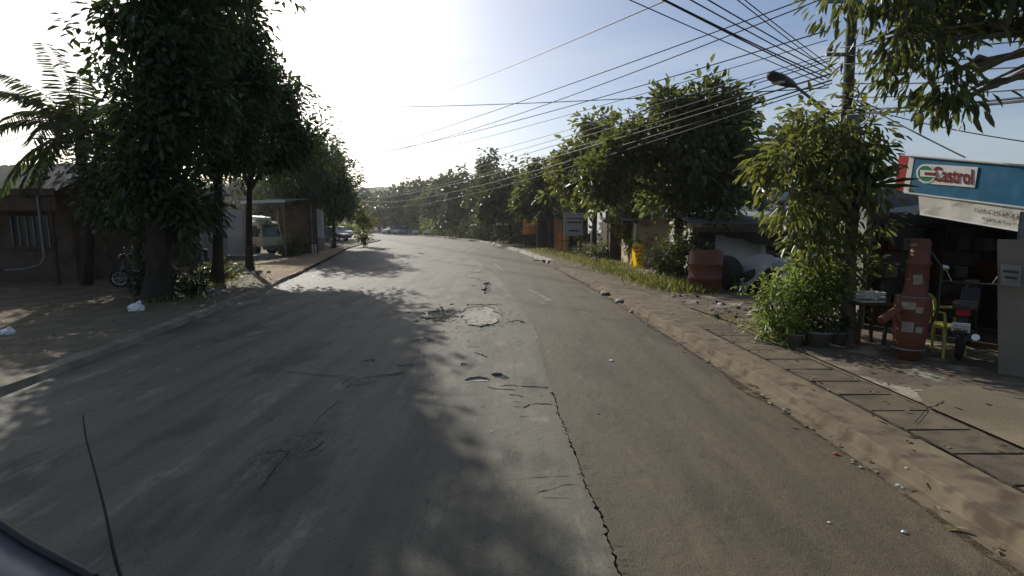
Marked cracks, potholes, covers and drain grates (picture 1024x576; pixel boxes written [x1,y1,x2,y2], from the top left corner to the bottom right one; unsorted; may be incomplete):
pothole [407,304,469,323]
crack [480,385,633,576]
crack [248,371,377,492]
